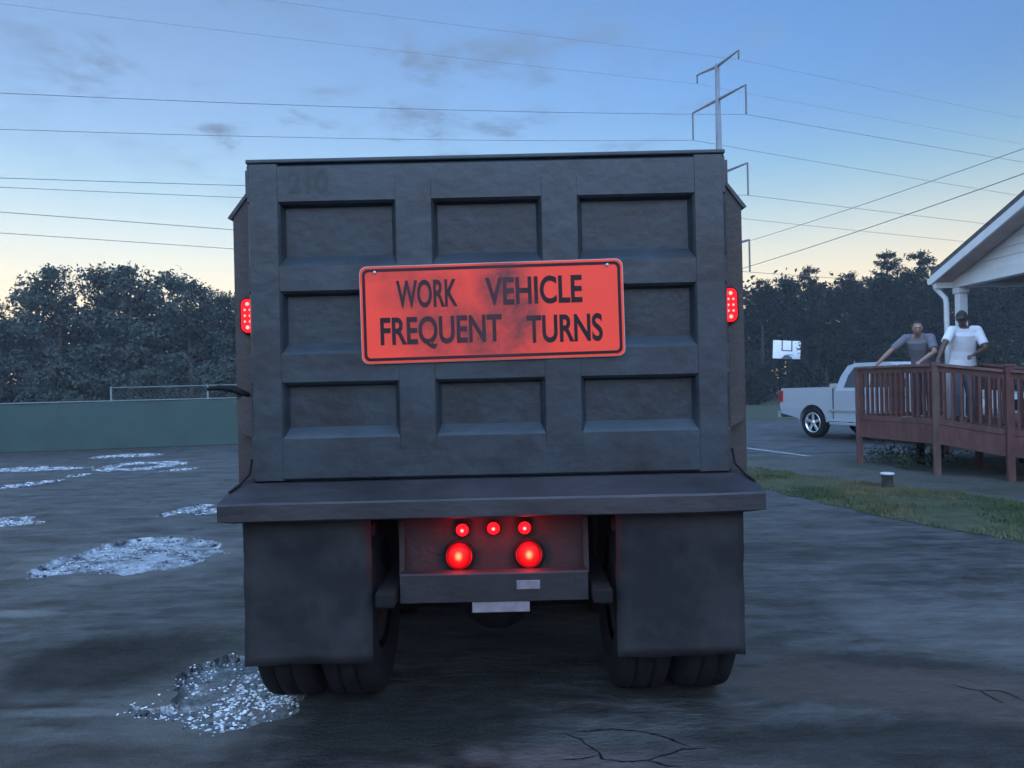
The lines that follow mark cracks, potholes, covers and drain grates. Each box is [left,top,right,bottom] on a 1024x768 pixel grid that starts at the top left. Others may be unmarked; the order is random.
pothole [155,503,213,517]
pothole [117,653,306,736]
pothole [92,461,187,472]
pothole [25,536,227,579]
pothole [0,479,66,489]
pothole [0,516,45,527]
crack [561,728,705,767]
crack [952,684,1022,704]
